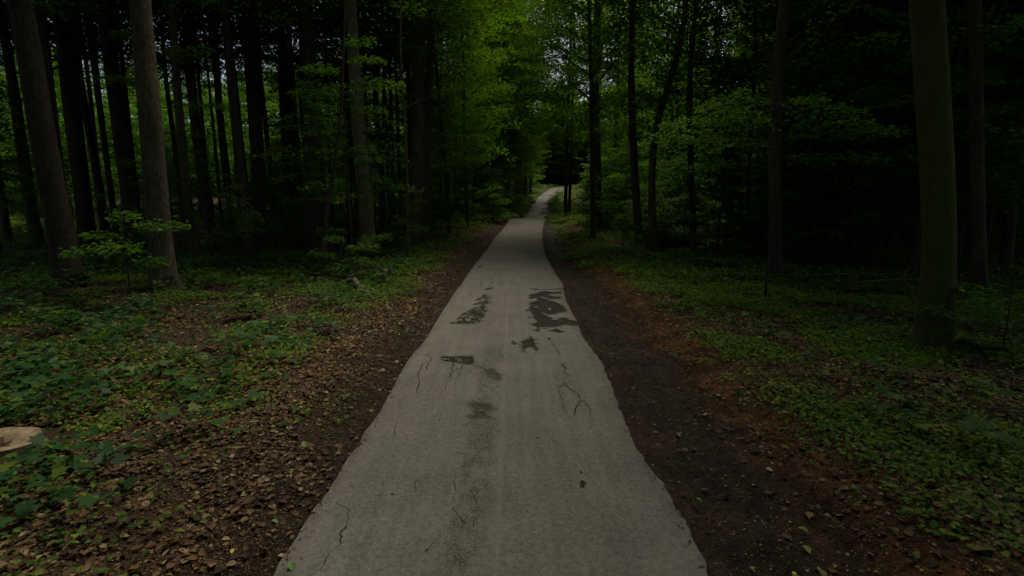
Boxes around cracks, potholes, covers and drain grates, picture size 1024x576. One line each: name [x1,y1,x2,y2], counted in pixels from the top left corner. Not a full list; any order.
crack [416,348,504,394]
crack [320,486,355,571]
crack [528,316,591,415]
crack [452,480,478,527]
